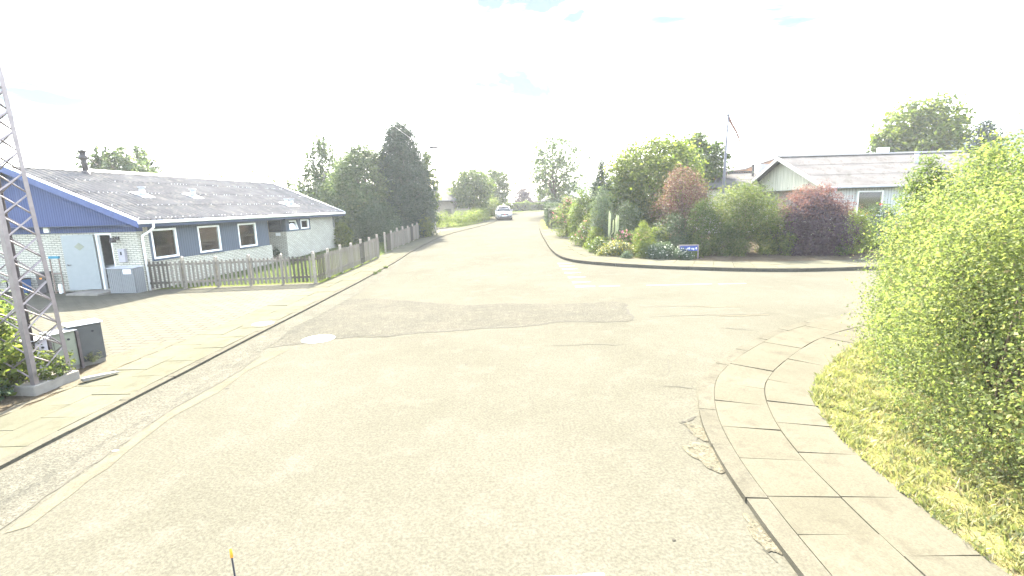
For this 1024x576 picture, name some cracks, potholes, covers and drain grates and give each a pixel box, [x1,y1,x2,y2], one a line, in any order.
pothole [743,513,782,555]
manhole cover [301,335,335,343]
pothole [682,442,725,473]
pothole [684,423,708,442]
